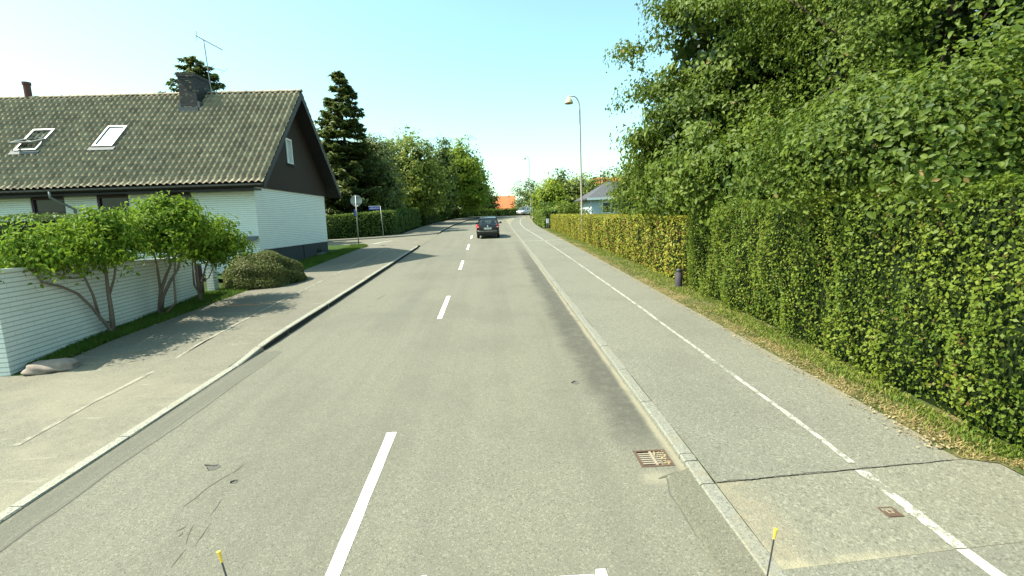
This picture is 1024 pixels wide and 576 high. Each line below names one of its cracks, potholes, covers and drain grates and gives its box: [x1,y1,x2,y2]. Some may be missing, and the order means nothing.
manhole cover [877,506,904,518]
drain grate [633,449,675,468]
crack [658,472,697,537]
crack [0,352,281,552]
